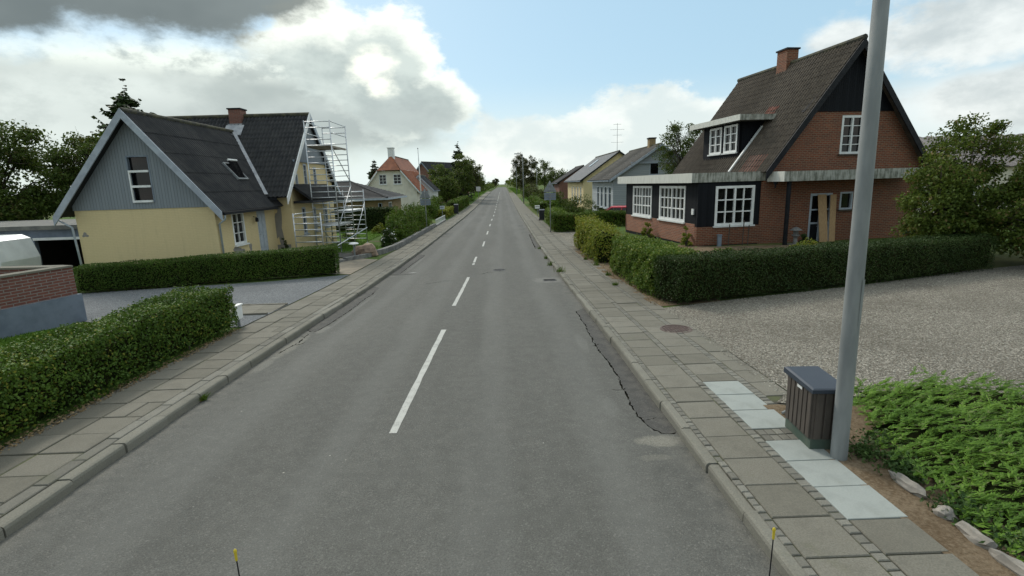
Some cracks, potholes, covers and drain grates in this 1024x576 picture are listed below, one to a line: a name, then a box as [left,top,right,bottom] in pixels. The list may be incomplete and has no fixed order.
manhole cover [660,325,693,333]
crack [576,311,676,434]
crack [277,293,374,353]
